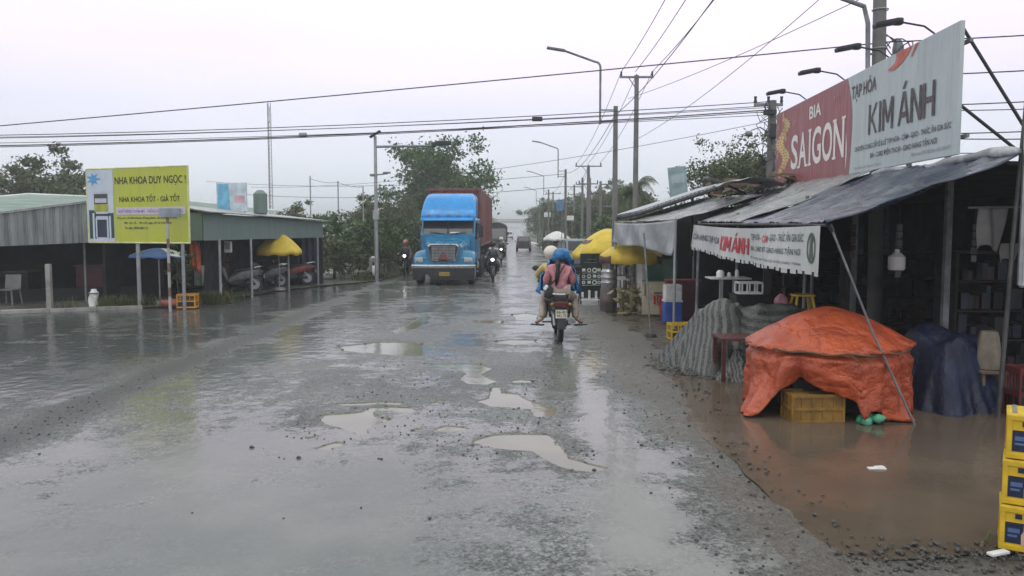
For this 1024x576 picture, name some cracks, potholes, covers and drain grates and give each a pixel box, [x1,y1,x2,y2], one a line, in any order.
pothole [337,342,435,357]
pothole [476,386,559,418]
pothole [314,441,347,450]
pothole [472,433,607,472]
pothole [418,362,498,385]
pothole [320,405,417,435]
pothole [388,313,432,334]
